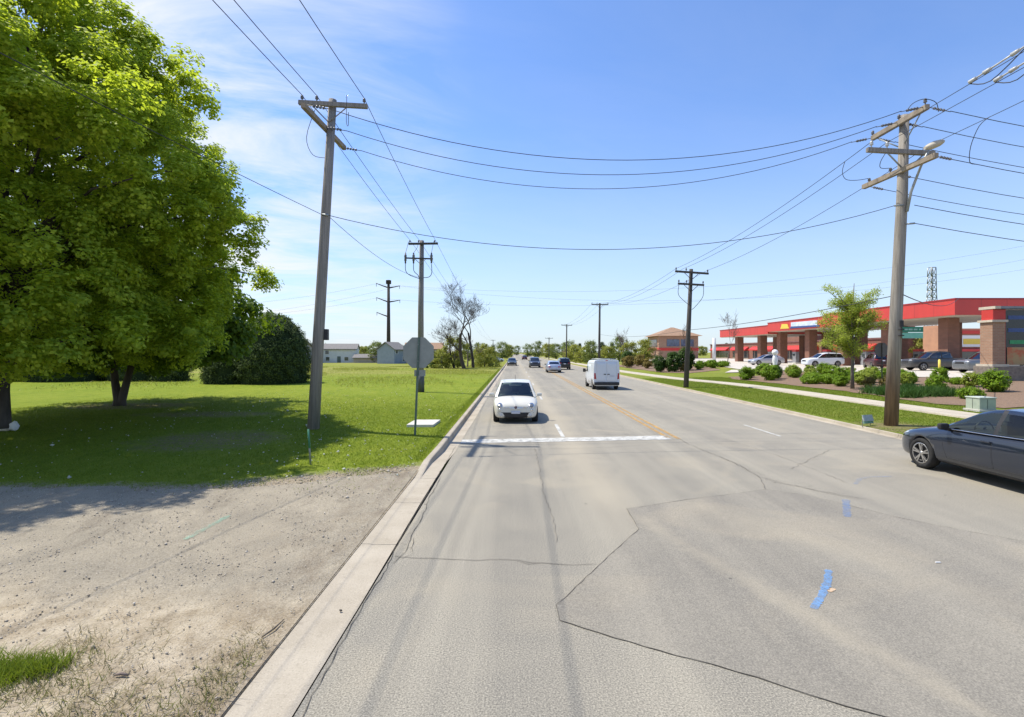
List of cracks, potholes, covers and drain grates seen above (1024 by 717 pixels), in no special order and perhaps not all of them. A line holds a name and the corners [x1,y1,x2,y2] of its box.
crack [302,446,580,717]
crack [458,444,650,542]
crack [677,437,866,499]
